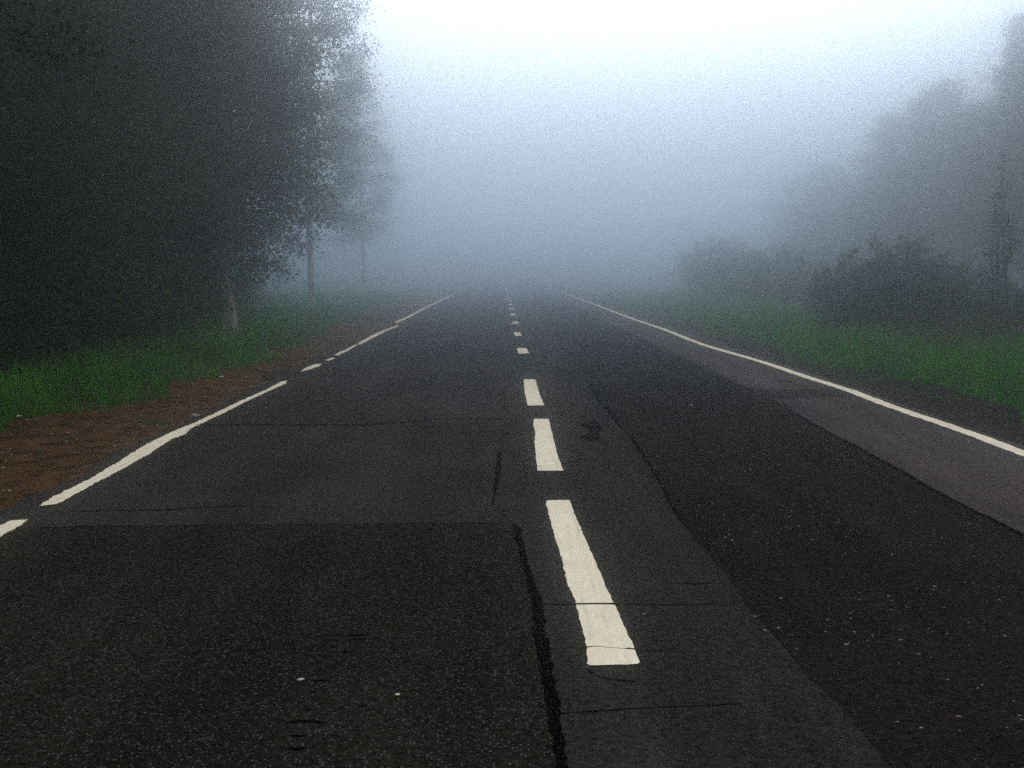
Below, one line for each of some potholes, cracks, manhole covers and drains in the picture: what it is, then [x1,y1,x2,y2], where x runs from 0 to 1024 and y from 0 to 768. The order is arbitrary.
crack [492,451,502,505]
crack [199,418,507,426]
crack [512,523,742,768]
pothole [580,420,608,447]
